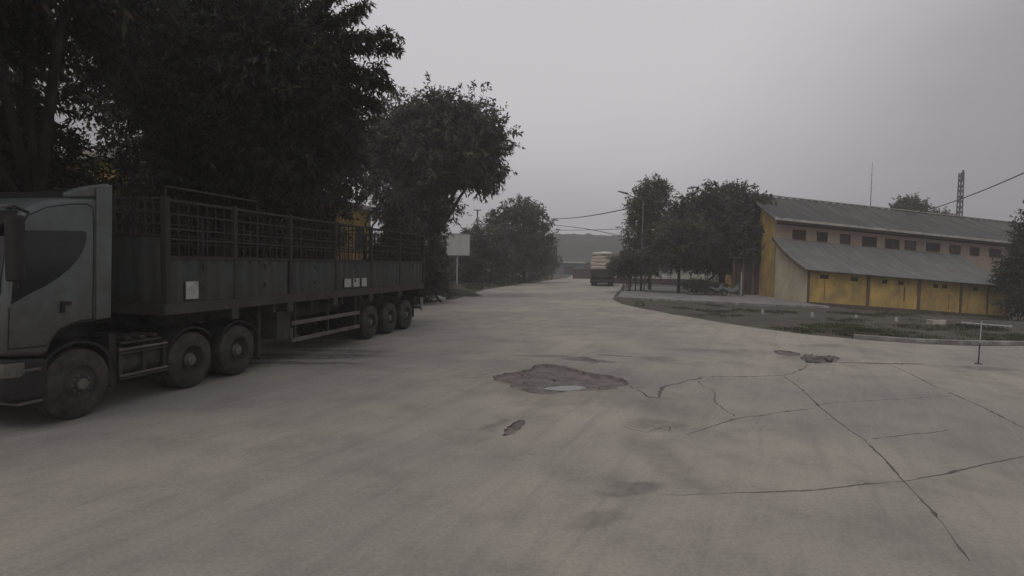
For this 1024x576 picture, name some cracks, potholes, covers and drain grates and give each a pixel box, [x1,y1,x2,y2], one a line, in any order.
pothole [503,420,526,436]
pothole [493,364,629,394]
crack [605,355,1024,562]
pothole [800,354,840,364]
